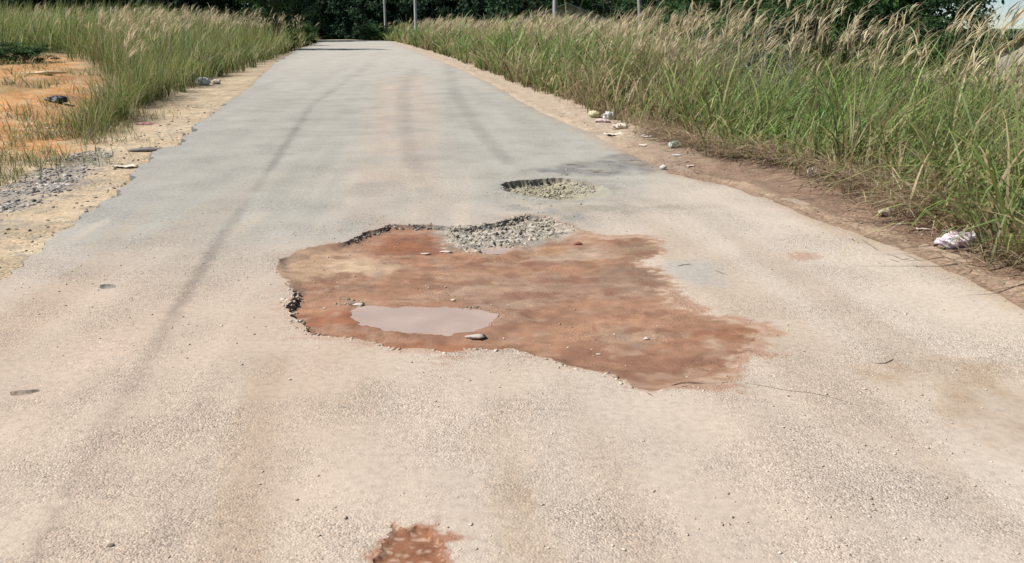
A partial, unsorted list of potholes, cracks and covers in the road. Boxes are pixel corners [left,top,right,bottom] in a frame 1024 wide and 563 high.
pothole [373,523,447,563]
pothole [501,178,613,201]
pothole [276,215,774,391]
crack [748,383,865,408]
